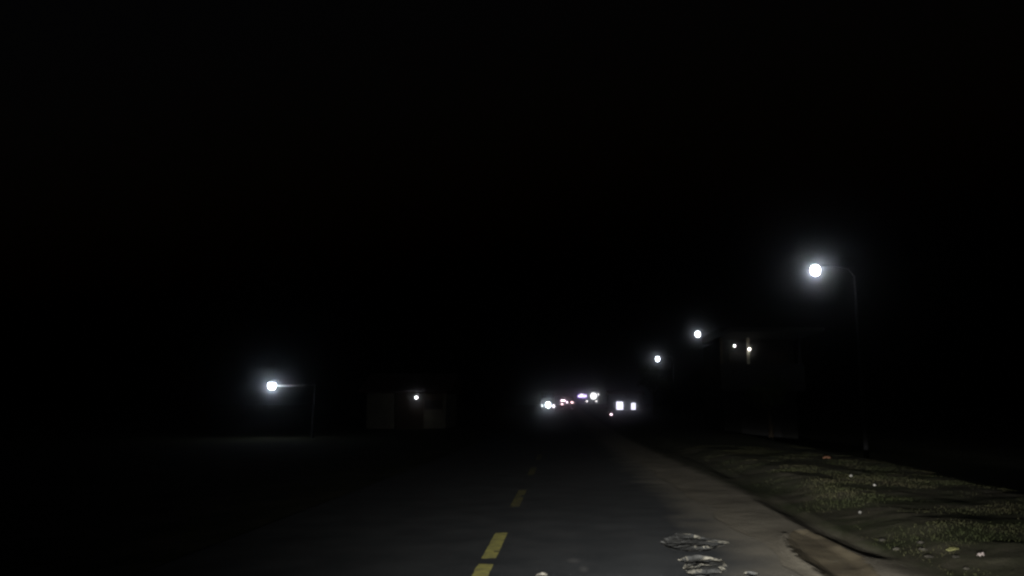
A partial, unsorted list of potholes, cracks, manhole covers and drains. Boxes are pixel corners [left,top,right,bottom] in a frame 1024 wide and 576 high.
pothole [679,555,728,576]
pothole [660,533,729,552]
